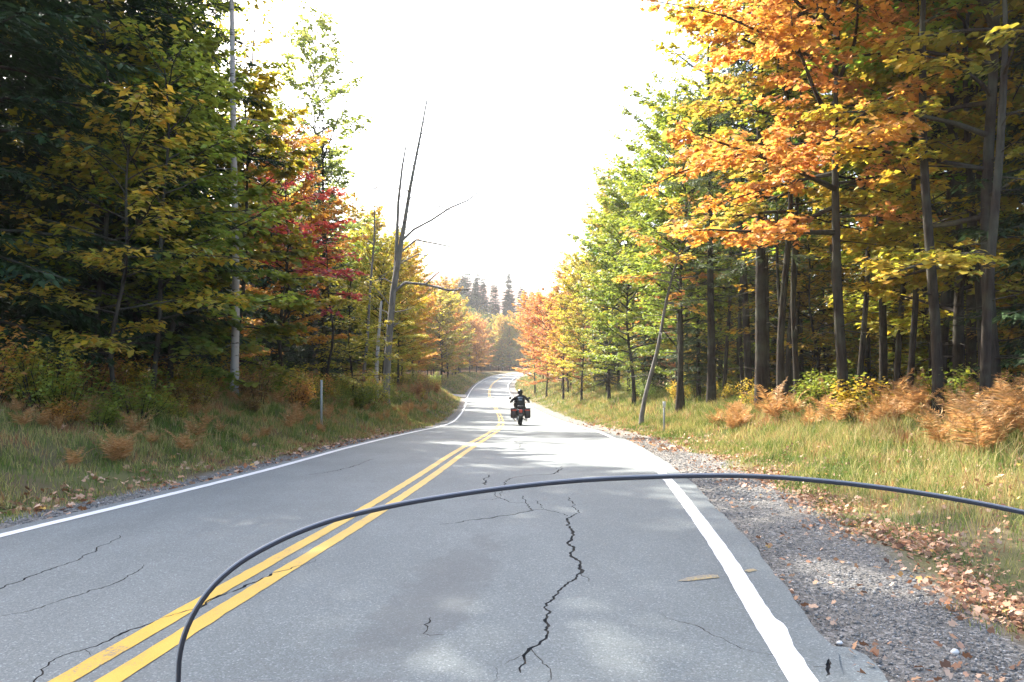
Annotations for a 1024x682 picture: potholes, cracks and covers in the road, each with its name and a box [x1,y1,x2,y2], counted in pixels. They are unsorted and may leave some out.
crack [440,469,589,682]
crack [3,566,143,616]
crack [0,535,121,589]
